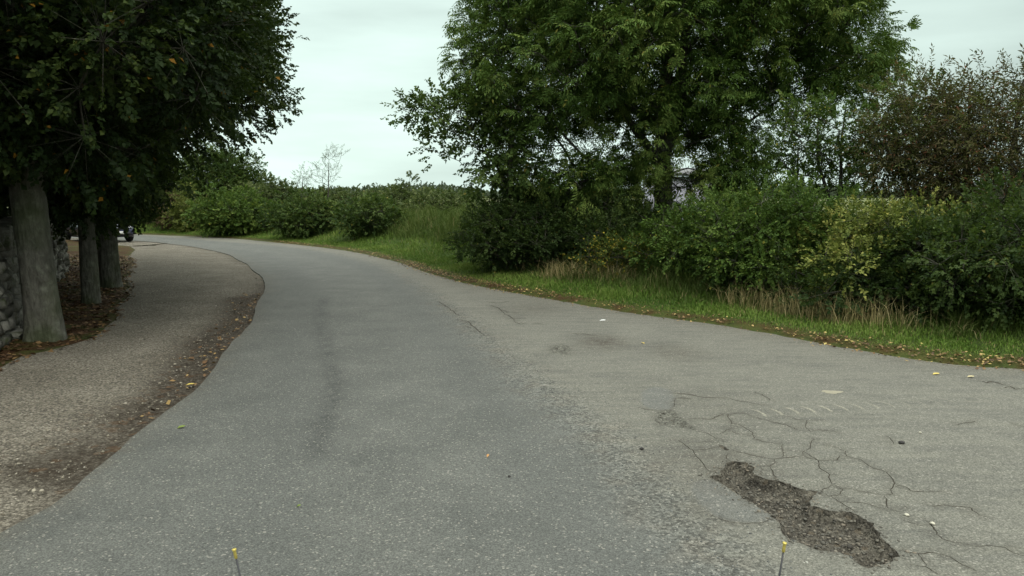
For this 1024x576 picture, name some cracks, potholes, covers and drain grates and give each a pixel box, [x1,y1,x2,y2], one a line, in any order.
pothole [698,458,917,574]
crack [681,413,1019,573]
pothole [655,410,695,430]
